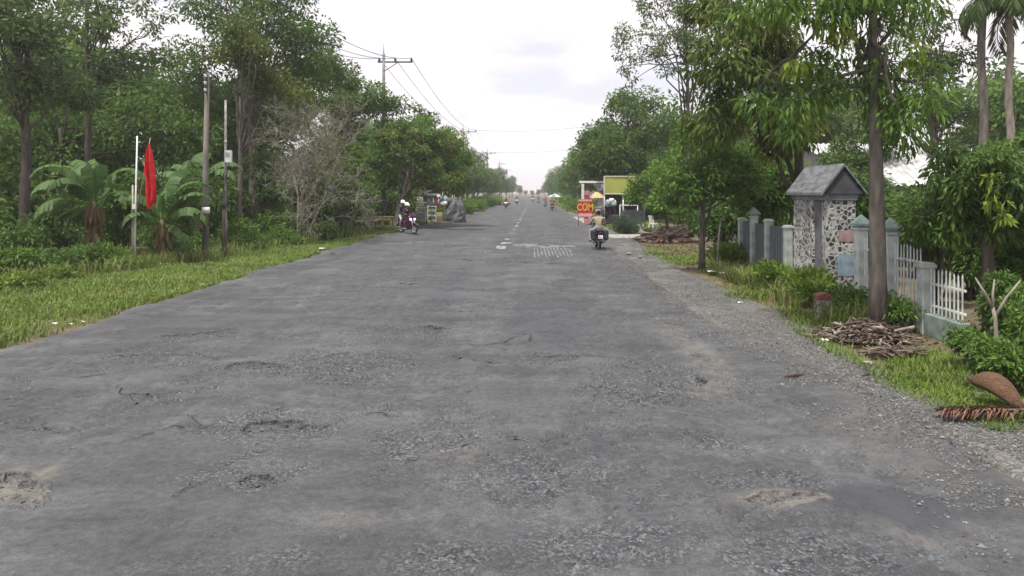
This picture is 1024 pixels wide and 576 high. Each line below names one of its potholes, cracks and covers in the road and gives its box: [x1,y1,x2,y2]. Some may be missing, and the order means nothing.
crack [171,479,208,496]
pothole [157,328,242,341]
pothole [731,487,835,518]
crack [78,354,223,438]
pothole [0,470,55,512]
pothole [226,472,287,492]
pothole [688,374,713,390]
pothole [219,360,292,373]
crack [21,422,58,433]
pothole [418,324,450,336]
pothole [231,416,330,438]
